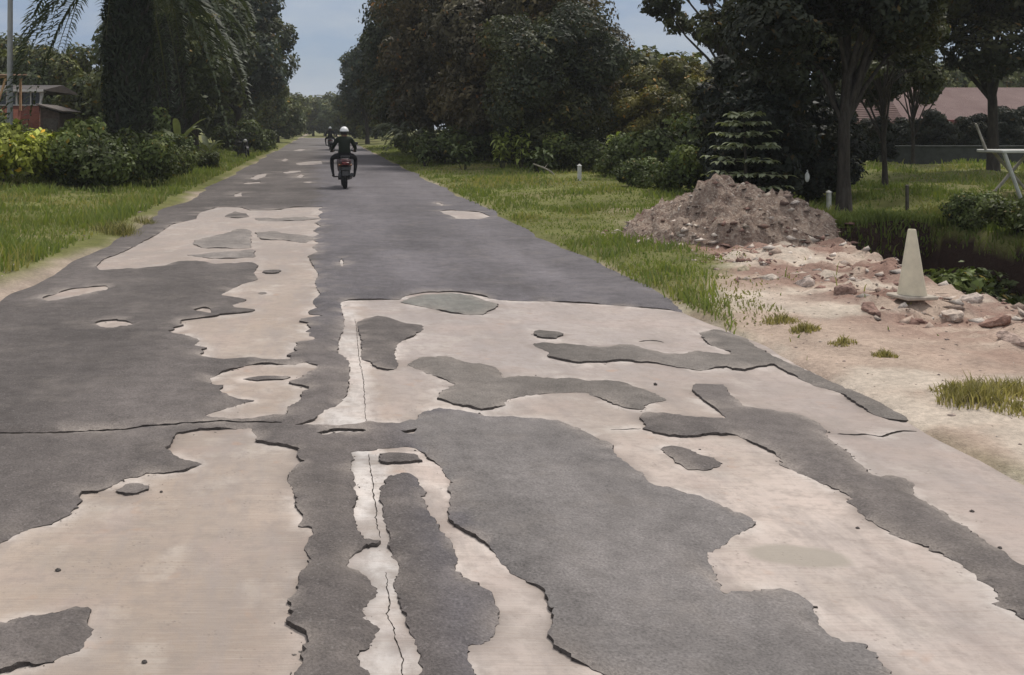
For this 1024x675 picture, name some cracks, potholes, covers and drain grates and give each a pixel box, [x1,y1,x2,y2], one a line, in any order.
crack [355,322,404,675]
pothole [0,427,314,675]
pothole [440,210,489,219]
pothole [296,291,1024,675]
pothole [97,207,323,359]
pothole [205,362,318,419]
pothole [42,285,108,301]
